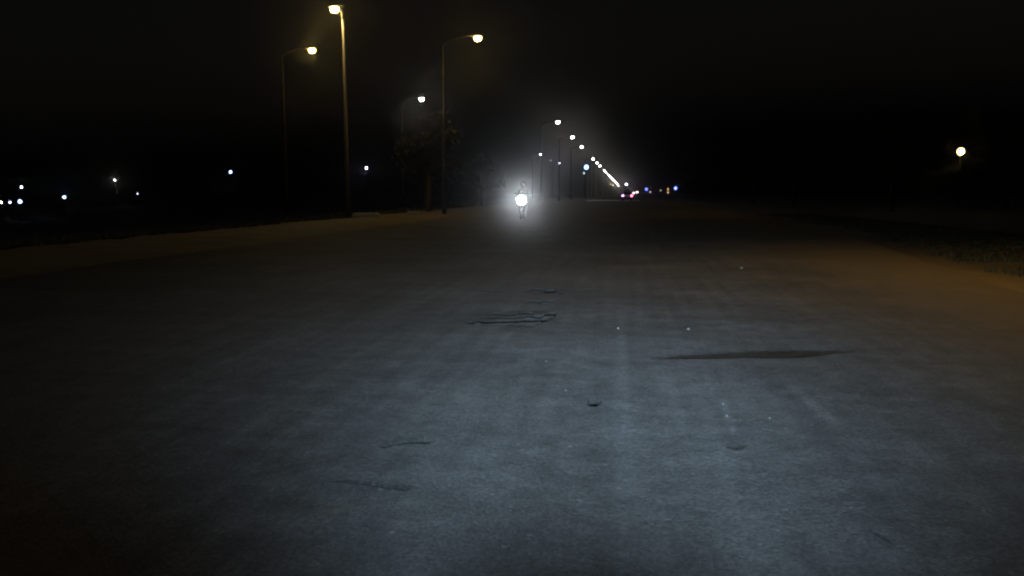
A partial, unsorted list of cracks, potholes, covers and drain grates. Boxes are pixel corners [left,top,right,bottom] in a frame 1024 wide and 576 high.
pothole [648,350,857,360]
crack [329,479,421,491]
pothole [464,309,559,328]
pothole [726,442,746,450]
pothole [586,398,602,407]
